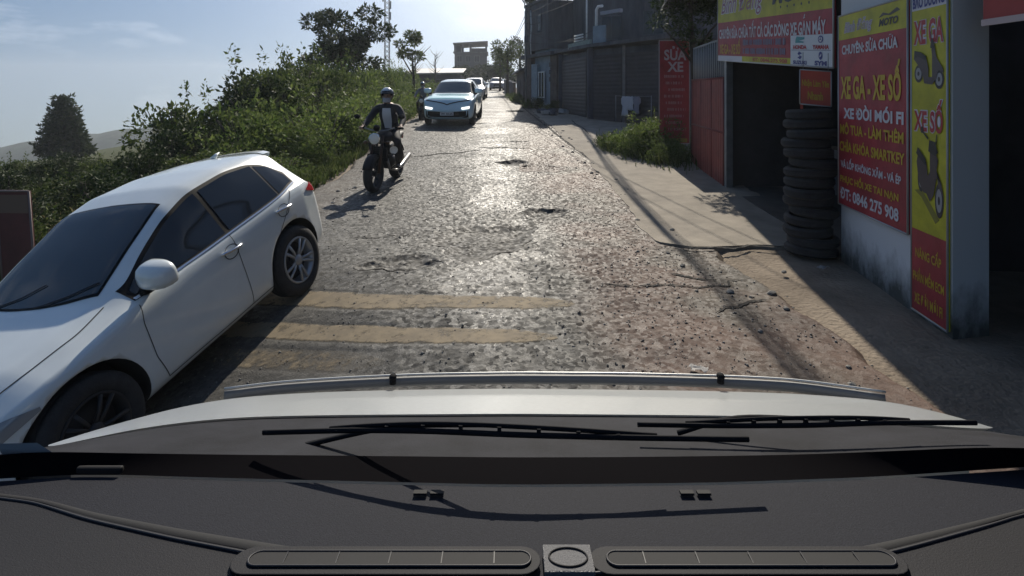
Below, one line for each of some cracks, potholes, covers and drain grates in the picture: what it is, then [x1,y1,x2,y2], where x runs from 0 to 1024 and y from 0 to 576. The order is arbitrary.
crack [597,273,763,313]
pothole [428,224,537,262]
crack [413,141,525,157]
pothole [353,253,443,271]
pothole [519,207,570,220]
